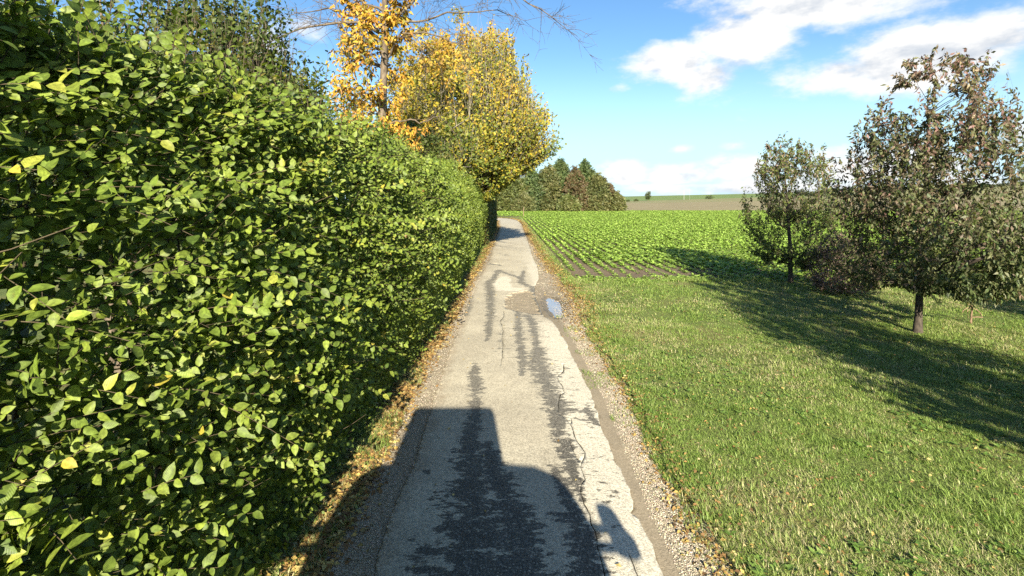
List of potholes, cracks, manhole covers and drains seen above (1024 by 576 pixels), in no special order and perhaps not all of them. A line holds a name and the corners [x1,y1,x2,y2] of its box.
pothole [541,296,567,319]
crack [557,365,605,576]
